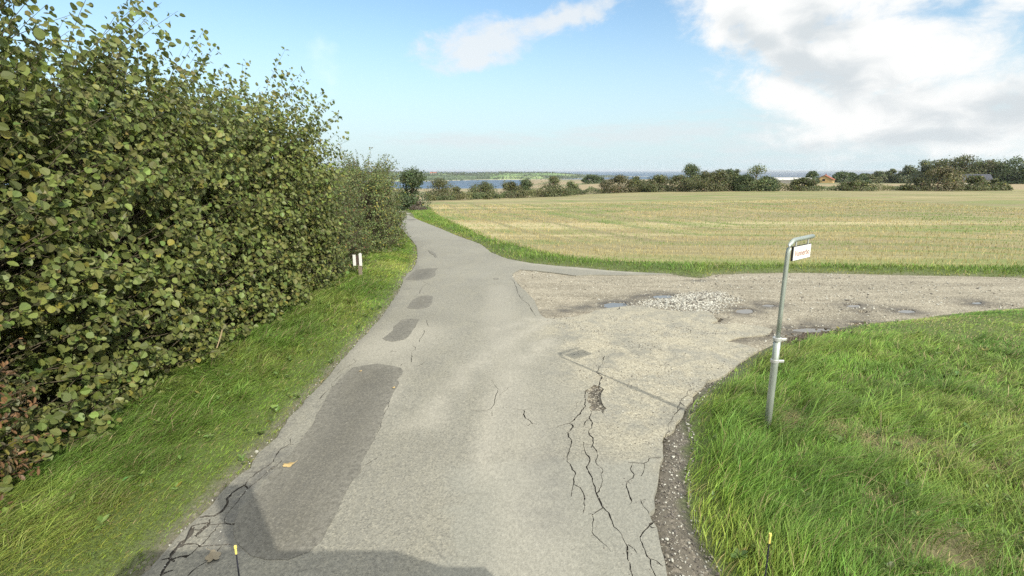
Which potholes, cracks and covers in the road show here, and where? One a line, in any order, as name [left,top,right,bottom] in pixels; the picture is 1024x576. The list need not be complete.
crack [159,439,294,576]
crack [482,380,533,426]
pothole [585,385,606,413]
crack [555,356,663,576]
